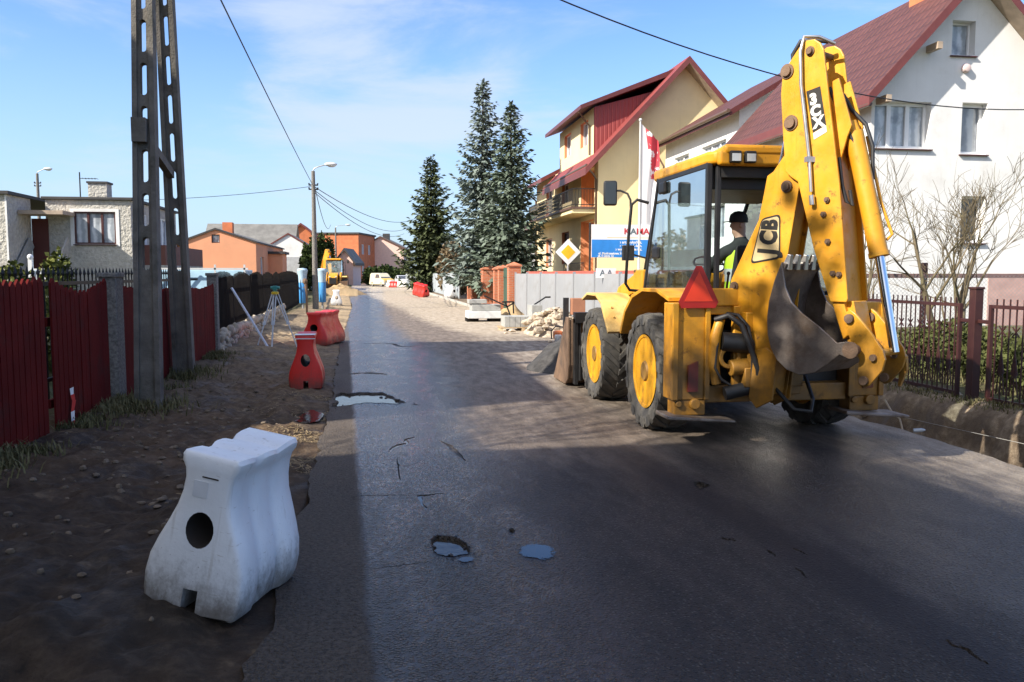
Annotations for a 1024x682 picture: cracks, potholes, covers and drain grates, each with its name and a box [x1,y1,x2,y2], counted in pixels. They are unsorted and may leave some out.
crack [355,437,444,509]
pothole [327,392,406,409]
crack [440,441,466,461]
crack [947,639,989,664]
pothole [431,534,475,560]
